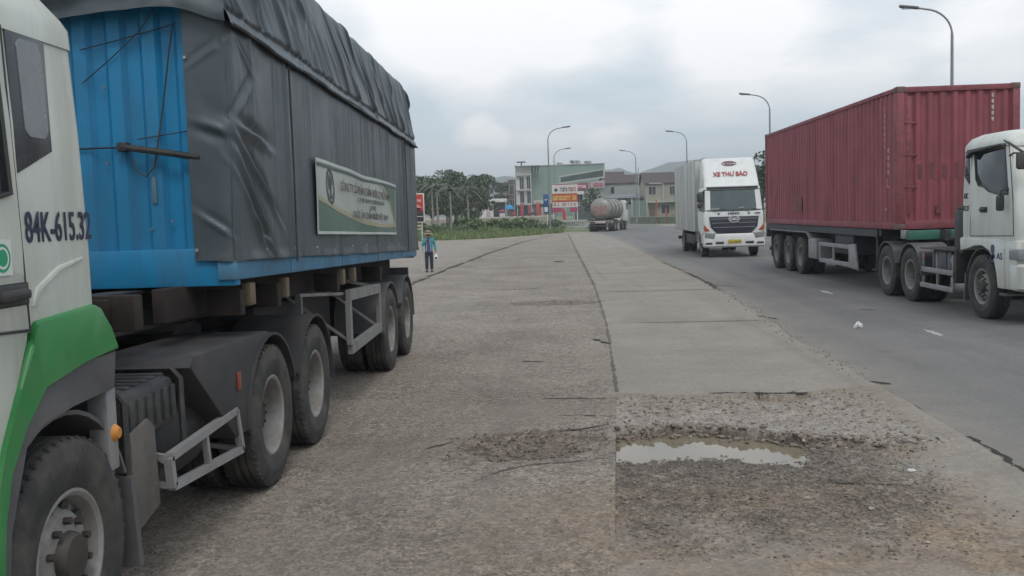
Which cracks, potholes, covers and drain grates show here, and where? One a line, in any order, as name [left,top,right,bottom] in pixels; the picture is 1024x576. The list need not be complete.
pothole [428,425,616,464]
pothole [615,427,1024,568]
crack [475,457,604,481]
crack [966,436,1024,472]
